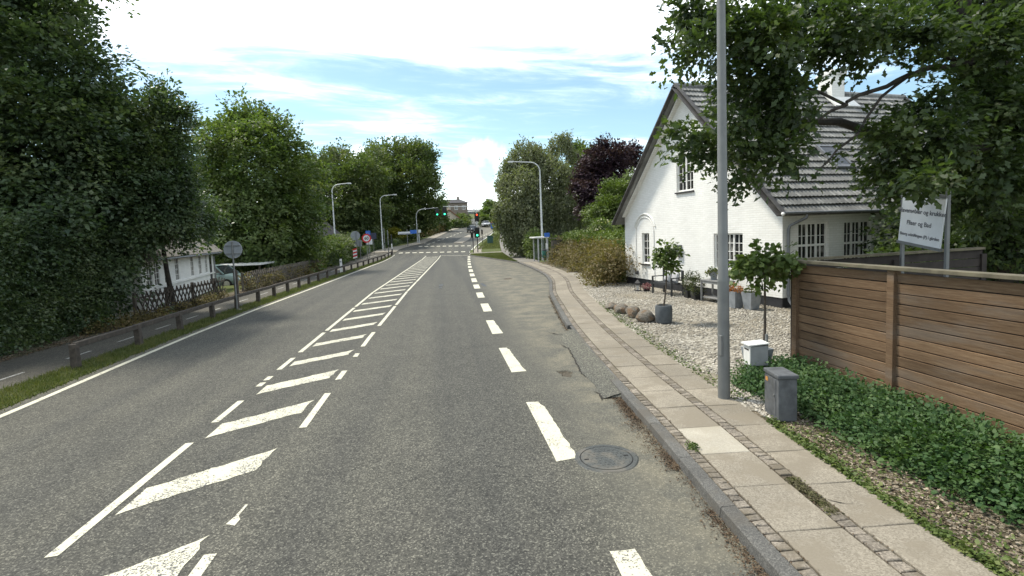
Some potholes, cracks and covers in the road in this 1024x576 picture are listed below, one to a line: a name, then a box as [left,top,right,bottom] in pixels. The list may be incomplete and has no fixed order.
manhole cover [574,445,639,473]
crack [553,333,612,400]
